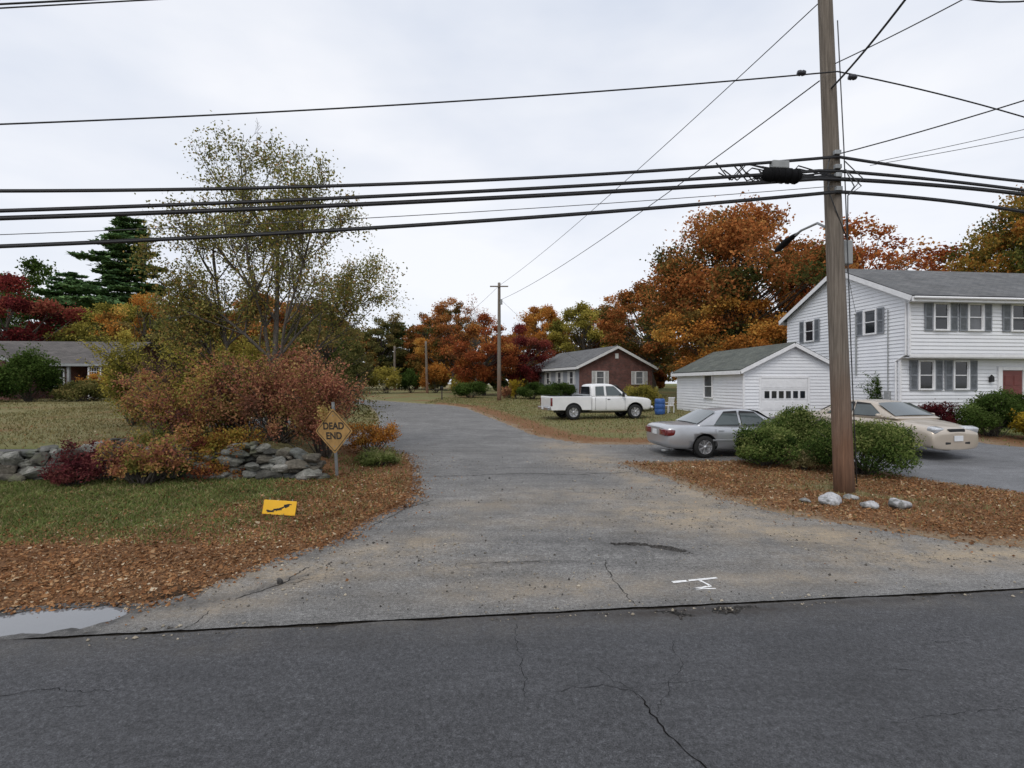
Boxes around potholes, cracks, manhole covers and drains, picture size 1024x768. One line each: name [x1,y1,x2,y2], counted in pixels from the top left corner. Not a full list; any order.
pothole [610,542,694,554]
crack [236,567,315,599]
pothole [655,609,694,620]
crack [553,640,717,768]
pothole [711,605,759,615]
crack [1,688,122,712]
